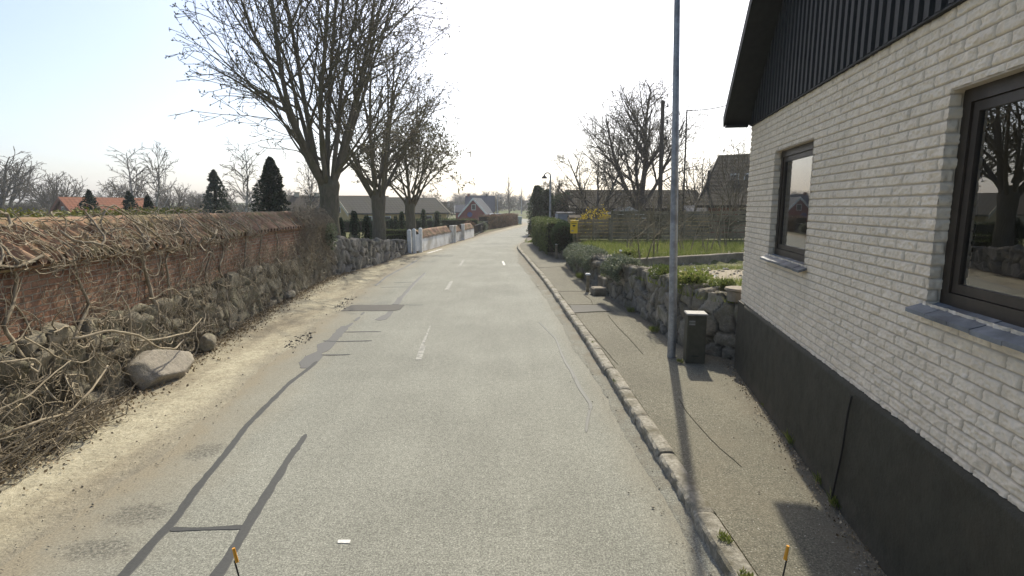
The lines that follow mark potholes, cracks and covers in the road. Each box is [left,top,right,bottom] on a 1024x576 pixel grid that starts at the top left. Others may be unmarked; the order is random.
crack [566,296,643,365]
crack [679,399,742,467]
